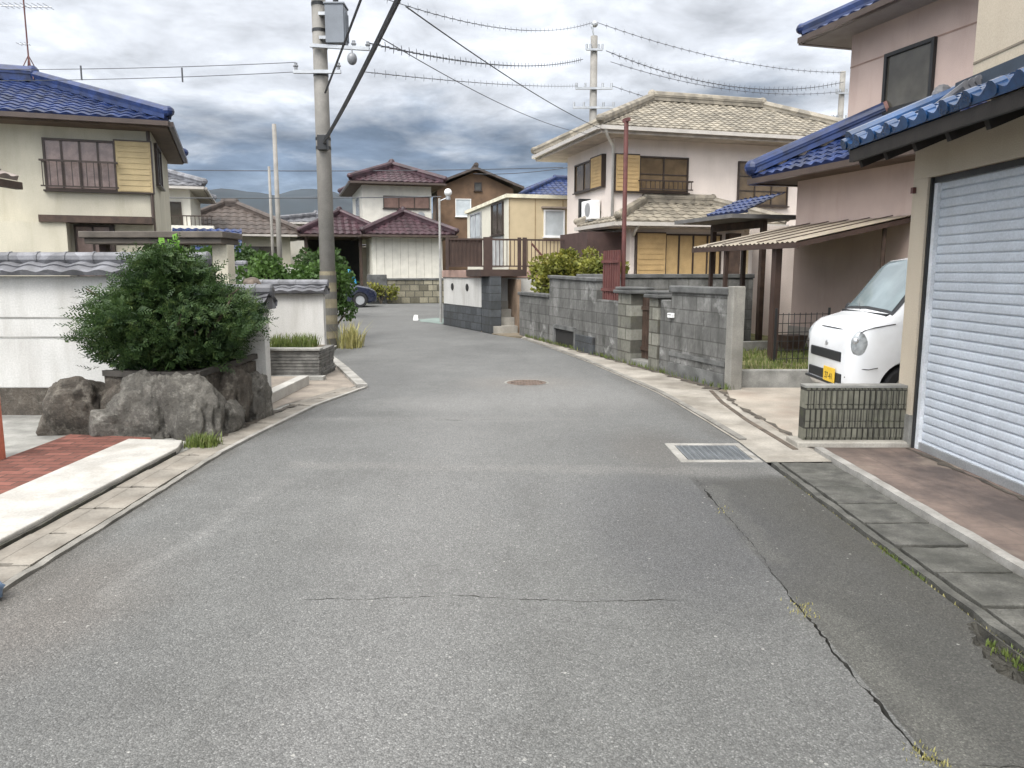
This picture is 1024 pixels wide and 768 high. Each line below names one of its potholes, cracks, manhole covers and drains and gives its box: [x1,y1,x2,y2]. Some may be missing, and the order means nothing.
drain grate [665,443,763,462]
crack [700,484,1024,768]
